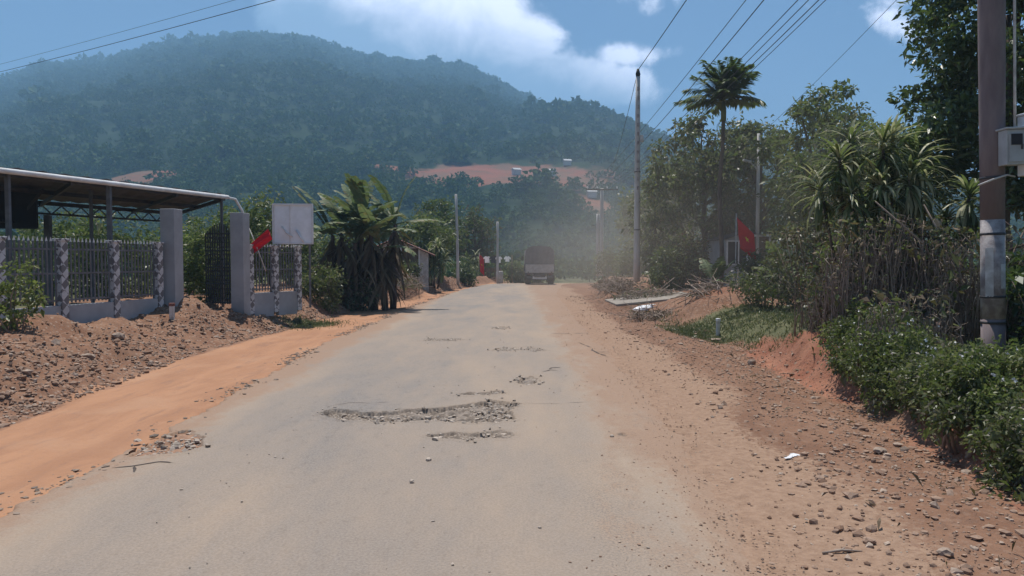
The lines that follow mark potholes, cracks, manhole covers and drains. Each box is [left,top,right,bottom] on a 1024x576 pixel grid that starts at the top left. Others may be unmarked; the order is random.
crack [112,461,175,472]
pothole [313,397,526,425]
pothole [509,374,546,386]
pothole [418,427,522,443]
pothole [449,389,511,397]
pothole [112,428,216,461]
